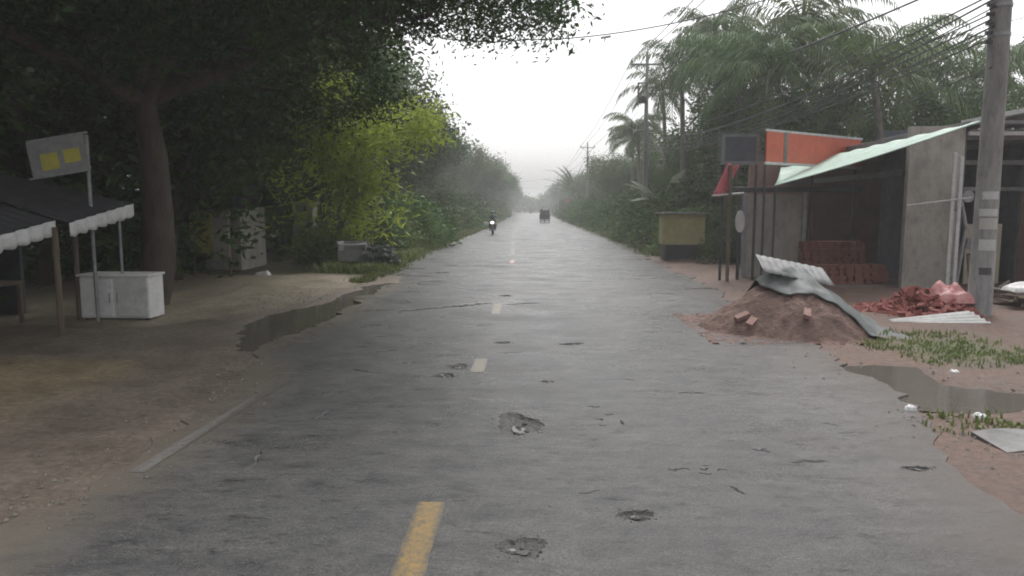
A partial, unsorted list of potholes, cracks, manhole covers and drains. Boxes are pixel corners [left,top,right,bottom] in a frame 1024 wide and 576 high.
pothole [492,534,548,562]
crack [668,465,744,494]
crack [396,290,491,326]
pothole [492,412,545,437]
pothole [615,508,661,523]
